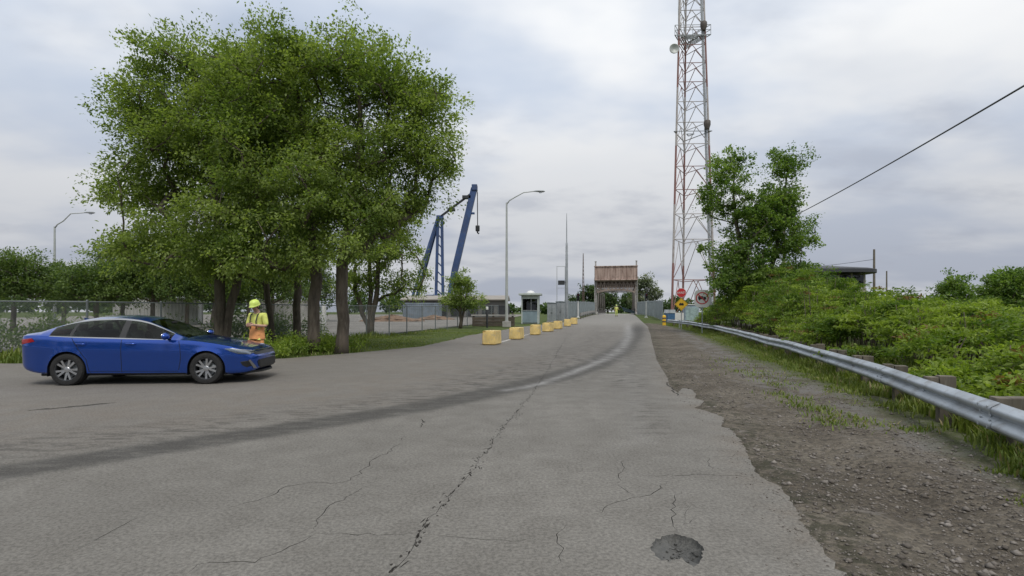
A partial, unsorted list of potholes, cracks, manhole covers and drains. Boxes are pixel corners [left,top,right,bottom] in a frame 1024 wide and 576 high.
crack [601,458,737,527]
crack [192,349,559,575]
pothole [650,533,704,566]
